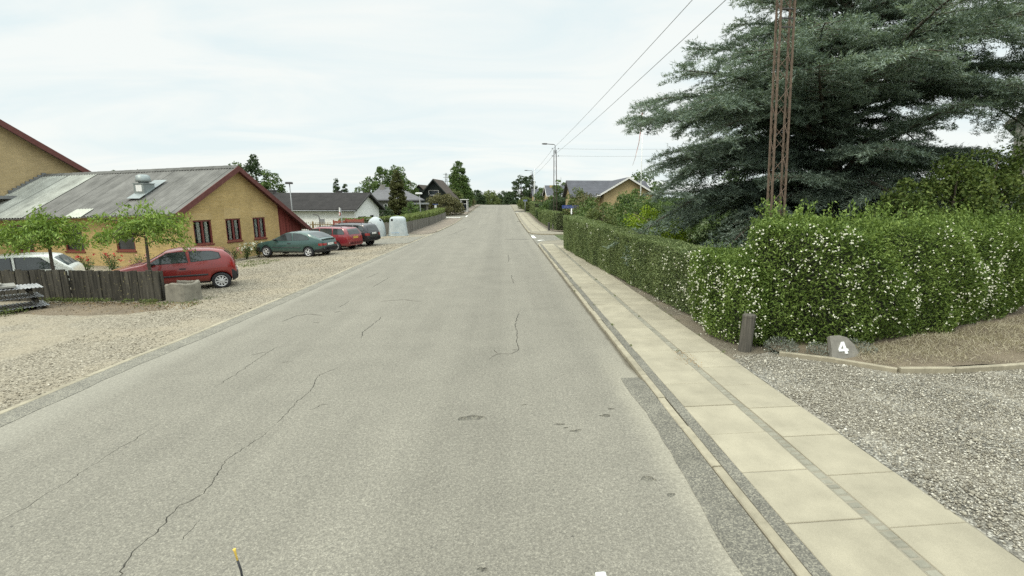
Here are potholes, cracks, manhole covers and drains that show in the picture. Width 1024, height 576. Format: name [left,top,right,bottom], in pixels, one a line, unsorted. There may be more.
crack [2,434,143,520]
crack [119,369,334,576]
